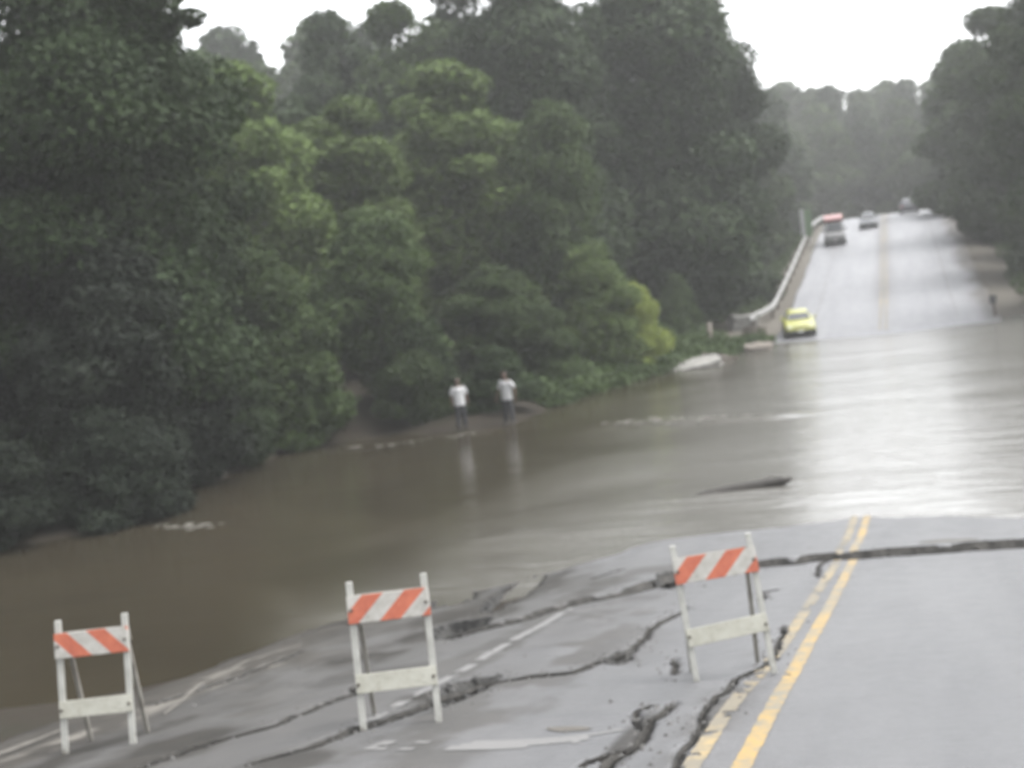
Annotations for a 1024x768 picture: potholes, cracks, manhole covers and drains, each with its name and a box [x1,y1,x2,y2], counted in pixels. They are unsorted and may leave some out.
crack [138,539,1024,768]
